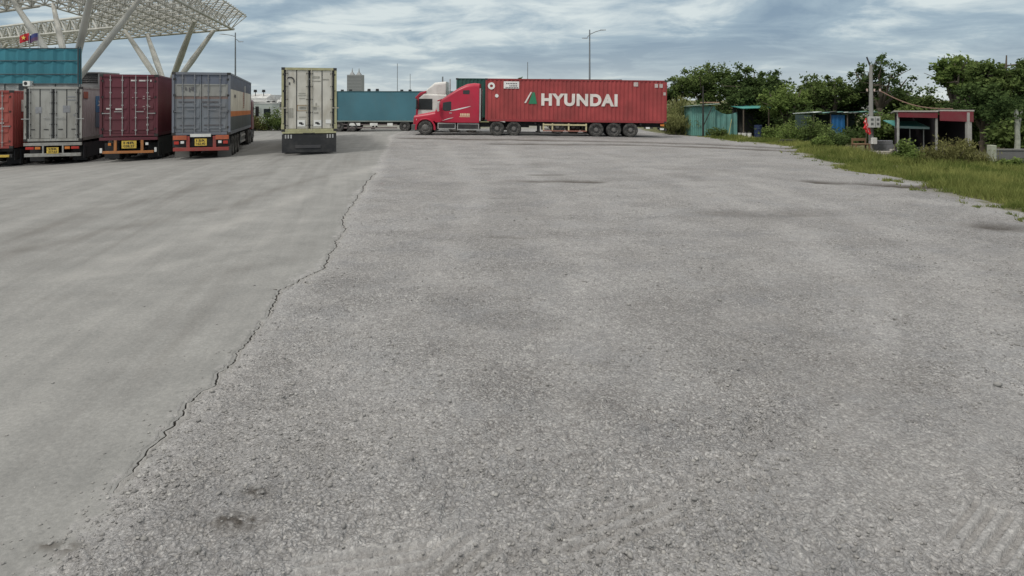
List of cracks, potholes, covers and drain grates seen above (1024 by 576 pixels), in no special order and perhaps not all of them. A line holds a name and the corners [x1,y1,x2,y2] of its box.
crack [109,173,378,493]
